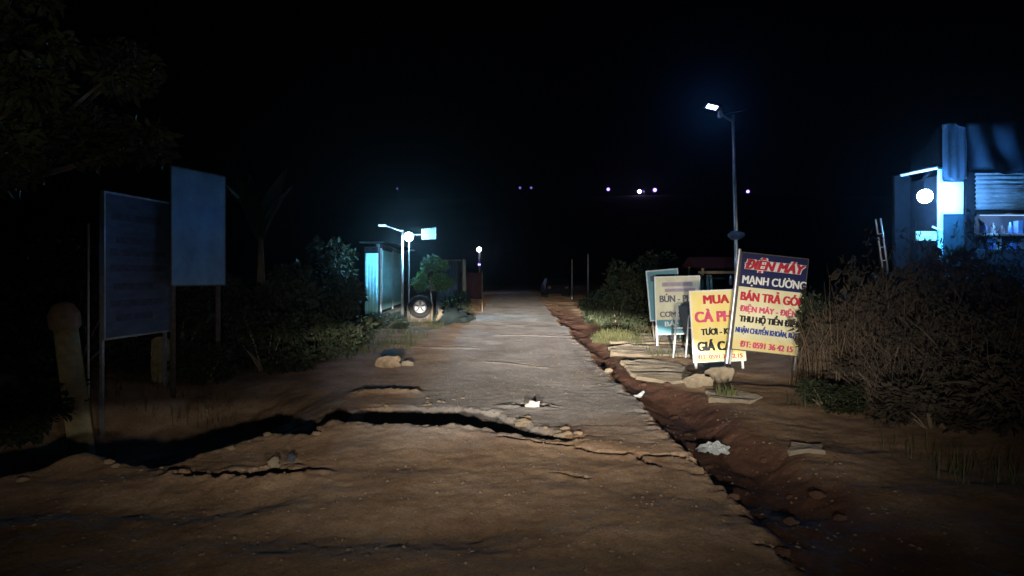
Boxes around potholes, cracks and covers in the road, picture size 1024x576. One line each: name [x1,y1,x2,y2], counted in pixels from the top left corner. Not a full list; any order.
crack [551,471,592,480]
crack [497,434,697,467]
